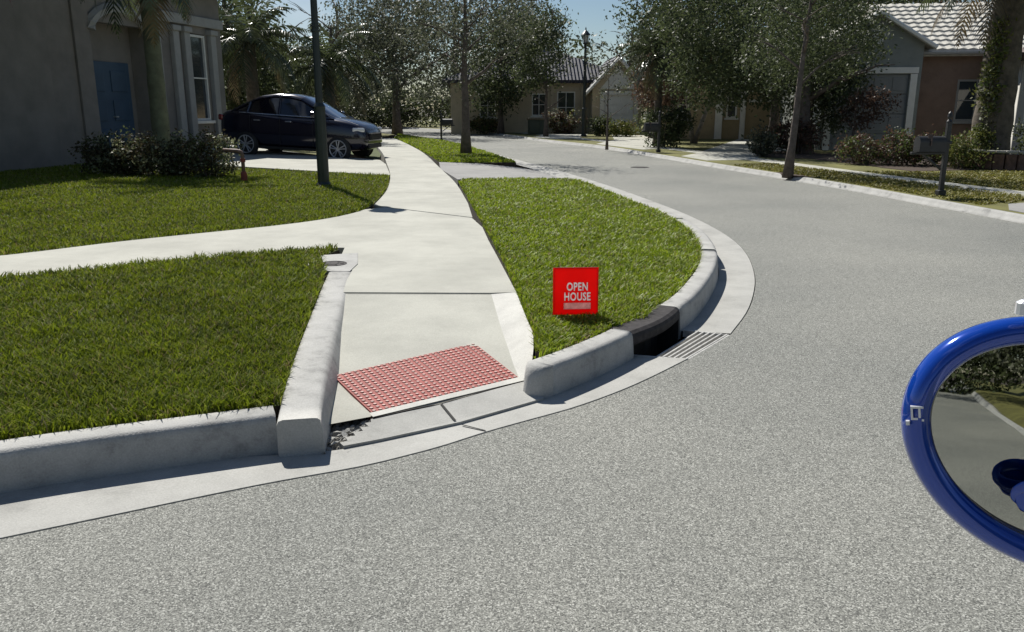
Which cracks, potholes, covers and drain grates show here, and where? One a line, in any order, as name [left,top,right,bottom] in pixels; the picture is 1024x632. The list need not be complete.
pothole [323,418,373,454]
drain grate [610,304,730,359]
